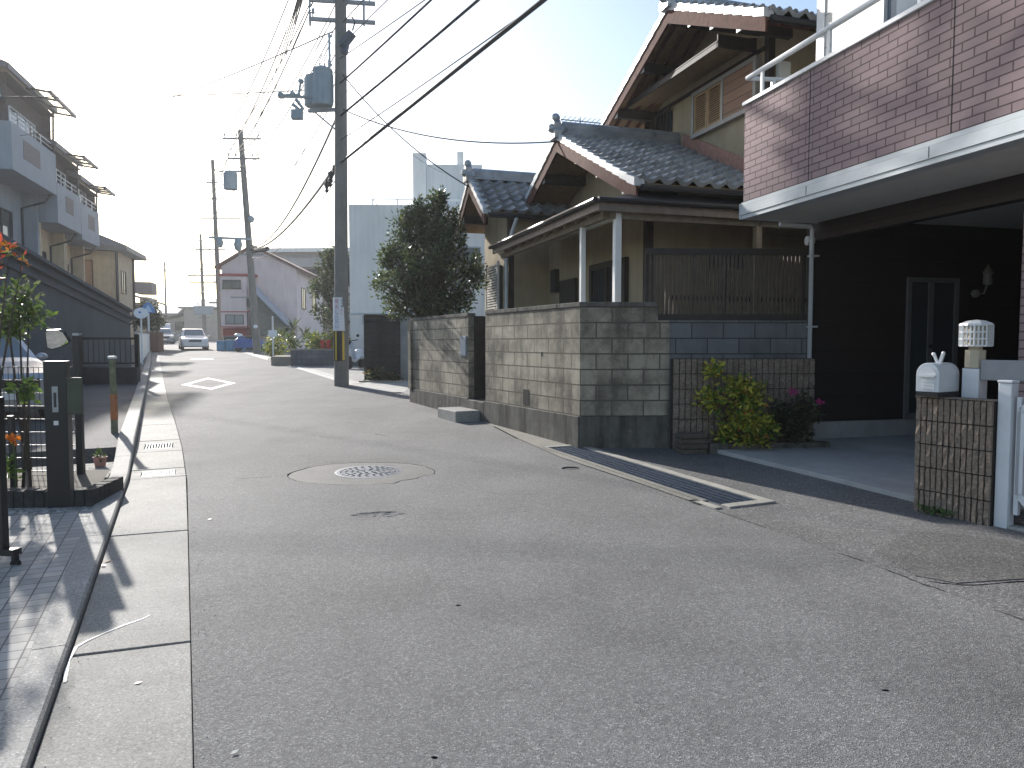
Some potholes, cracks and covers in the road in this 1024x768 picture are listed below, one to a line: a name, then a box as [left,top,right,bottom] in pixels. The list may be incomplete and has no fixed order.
drain grate [542,445,776,509]
manhole cover [335,465,402,478]
pothole [350,511,409,521]
